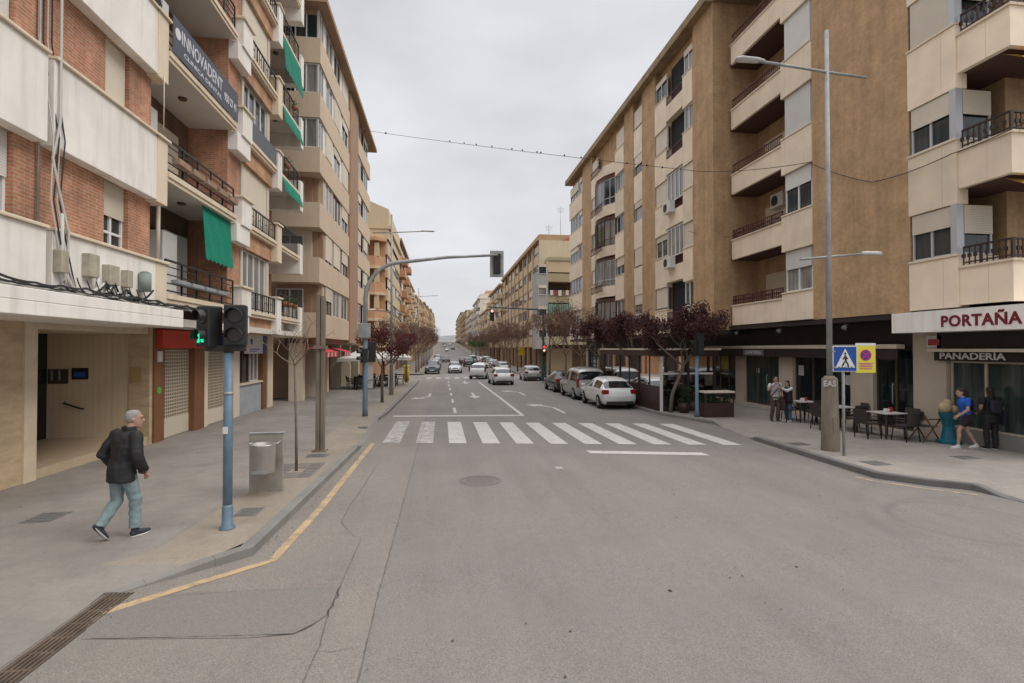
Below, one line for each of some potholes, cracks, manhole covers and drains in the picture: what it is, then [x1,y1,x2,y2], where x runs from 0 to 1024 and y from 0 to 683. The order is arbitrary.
crack [119,540,361,683]
manhole cover [459,475,502,486]
